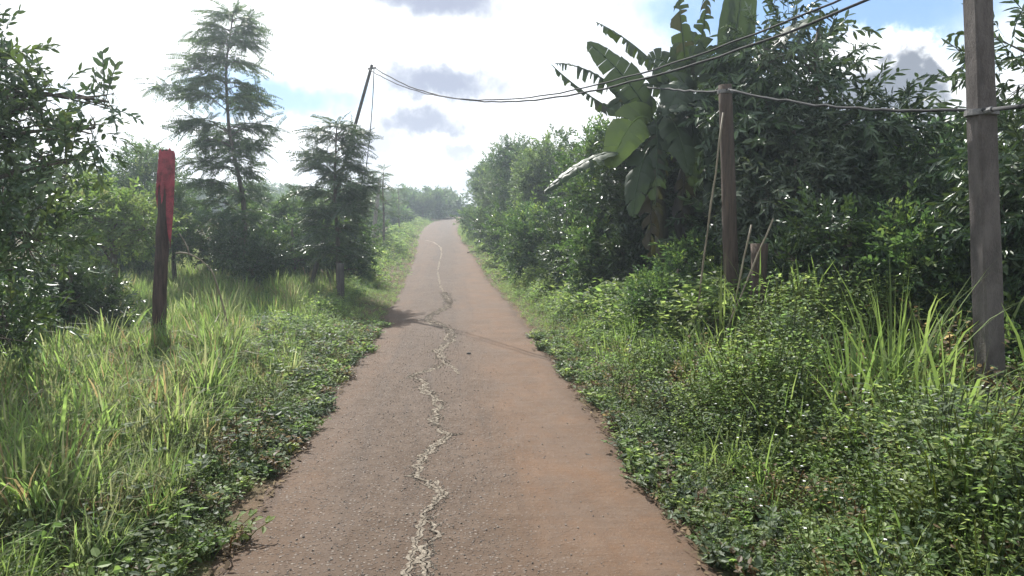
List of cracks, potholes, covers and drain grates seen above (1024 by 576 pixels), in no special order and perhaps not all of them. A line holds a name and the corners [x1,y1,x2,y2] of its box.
crack [400,240,463,576]
